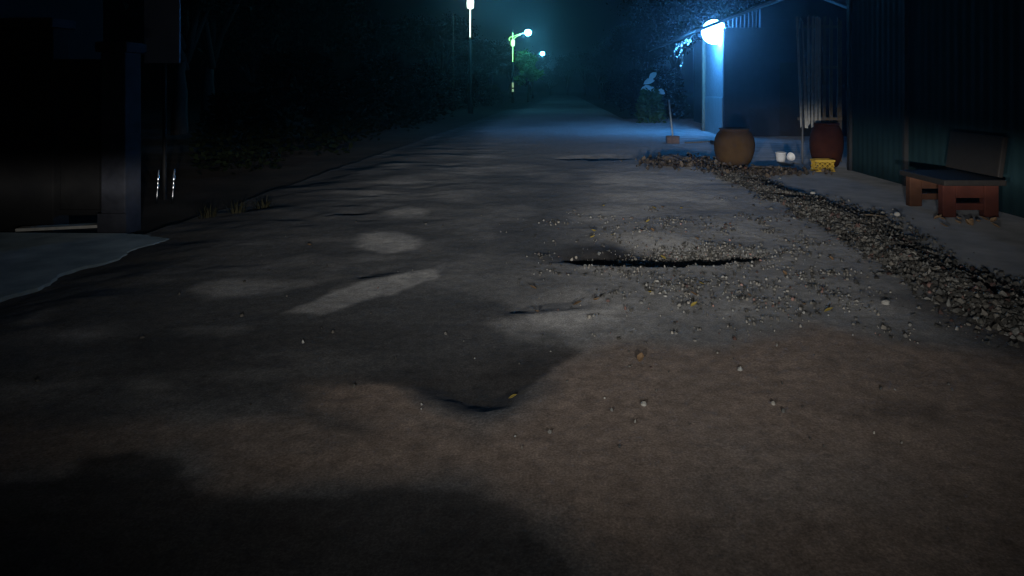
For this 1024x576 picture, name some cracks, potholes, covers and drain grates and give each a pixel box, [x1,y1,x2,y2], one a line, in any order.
pothole [551,230,773,268]
